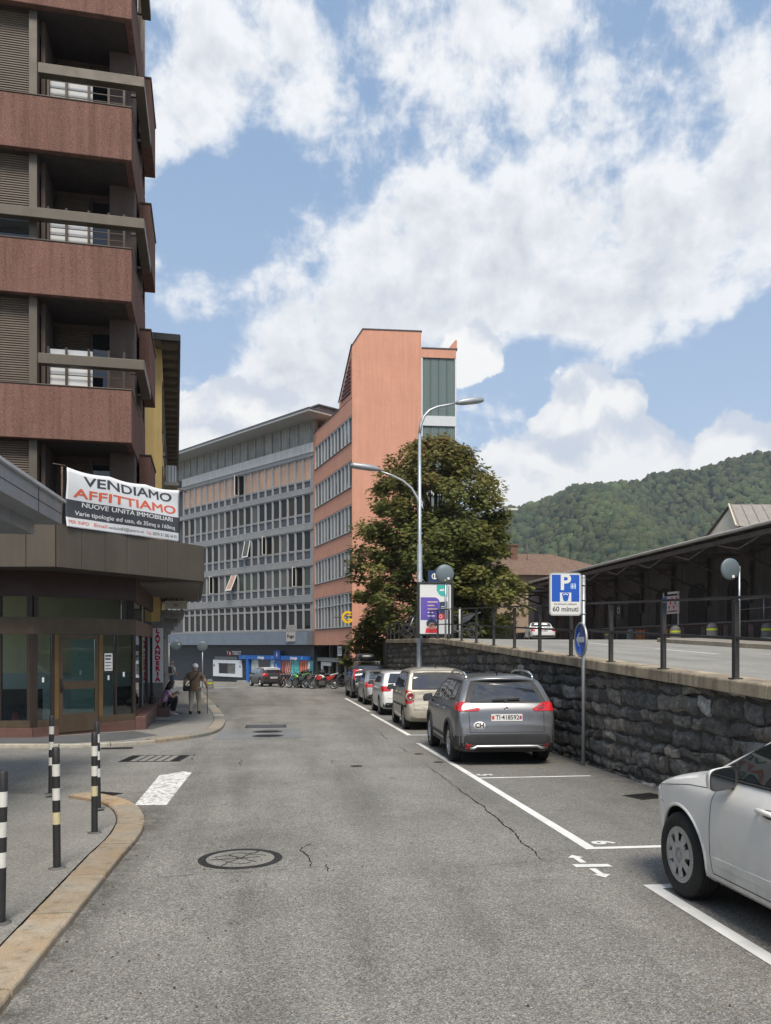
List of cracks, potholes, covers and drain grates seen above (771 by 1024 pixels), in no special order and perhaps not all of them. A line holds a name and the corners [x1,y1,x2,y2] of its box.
crack [429,767,555,867]
manhole cover [198,849,282,870]
